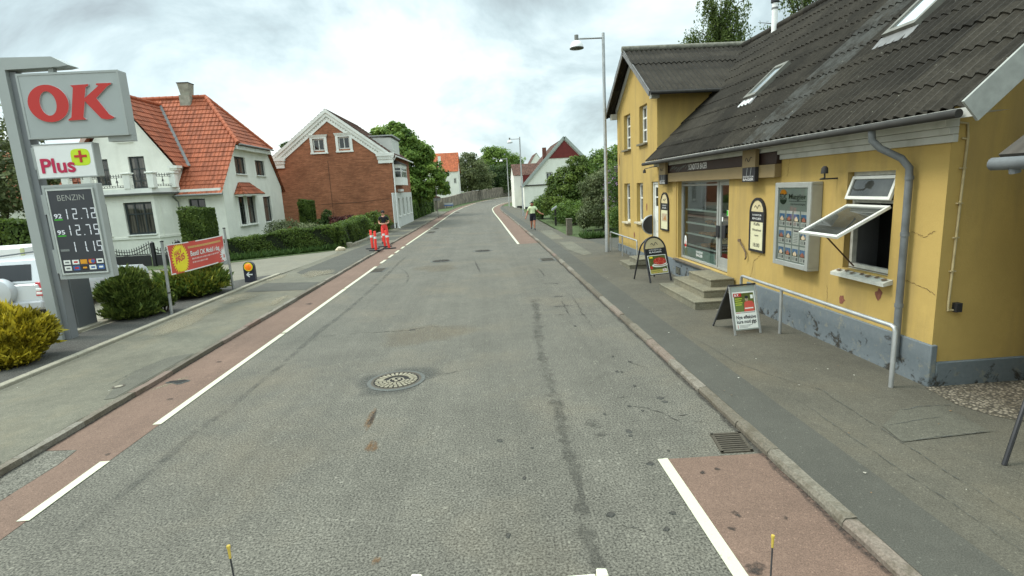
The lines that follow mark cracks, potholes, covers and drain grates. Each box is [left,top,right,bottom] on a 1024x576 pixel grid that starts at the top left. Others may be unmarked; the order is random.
crack [539,269,594,329]
manhole cover [364,369,432,393]
drain grate [710,432,754,453]
